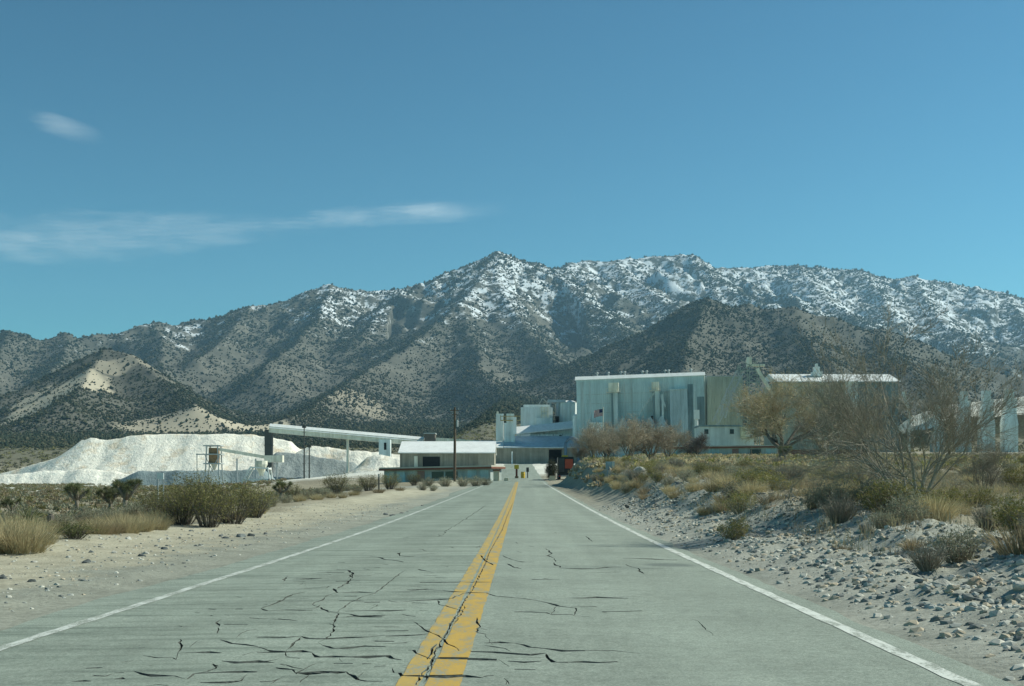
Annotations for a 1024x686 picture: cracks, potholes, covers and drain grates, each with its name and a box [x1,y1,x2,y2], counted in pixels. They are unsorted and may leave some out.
crack [71,506,640,686]
